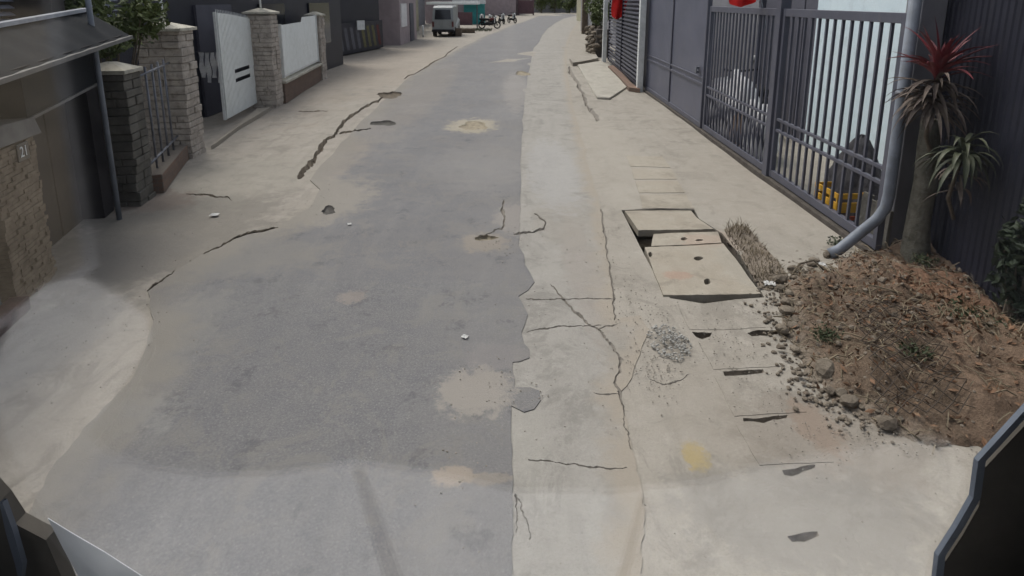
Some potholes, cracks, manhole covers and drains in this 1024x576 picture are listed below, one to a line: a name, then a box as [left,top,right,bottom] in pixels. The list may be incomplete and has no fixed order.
crack [147,270,175,291]
pothole [377,91,402,99]
crack [204,227,278,254]
crack [297,97,383,179]
crack [478,200,546,237]
crack [514,494,531,540]
crack [526,284,632,470]
